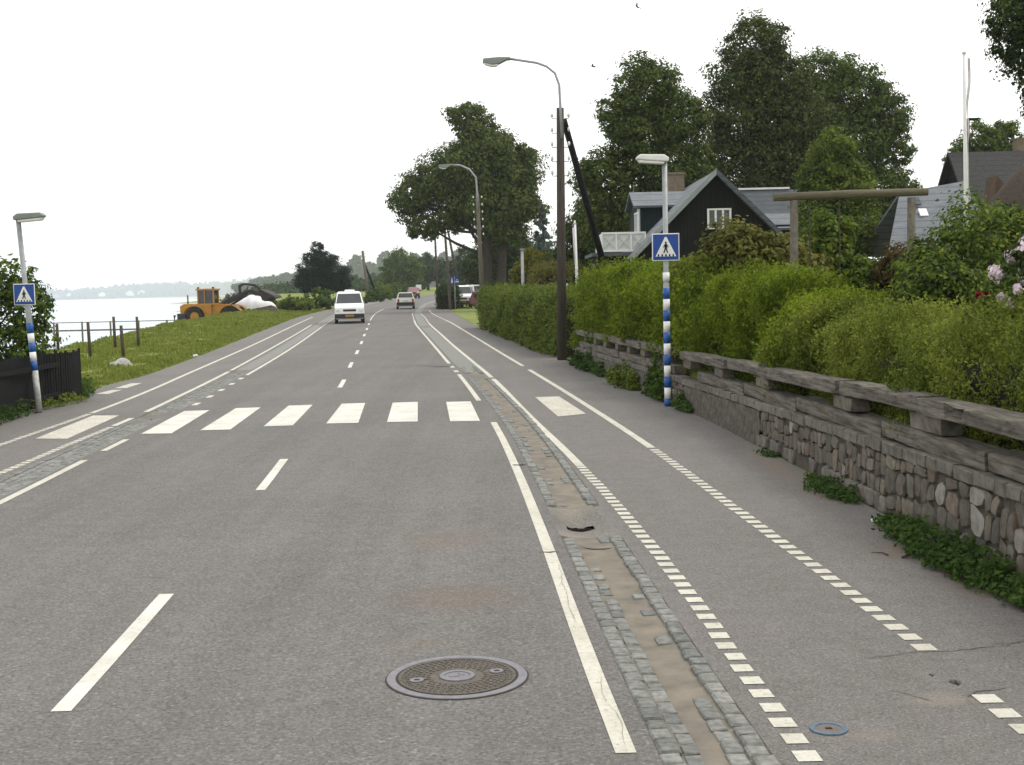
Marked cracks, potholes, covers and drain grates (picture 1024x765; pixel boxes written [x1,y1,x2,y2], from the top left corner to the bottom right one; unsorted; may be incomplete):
utility cover [810,721,848,736]
manhole cover [385,655,529,700]
